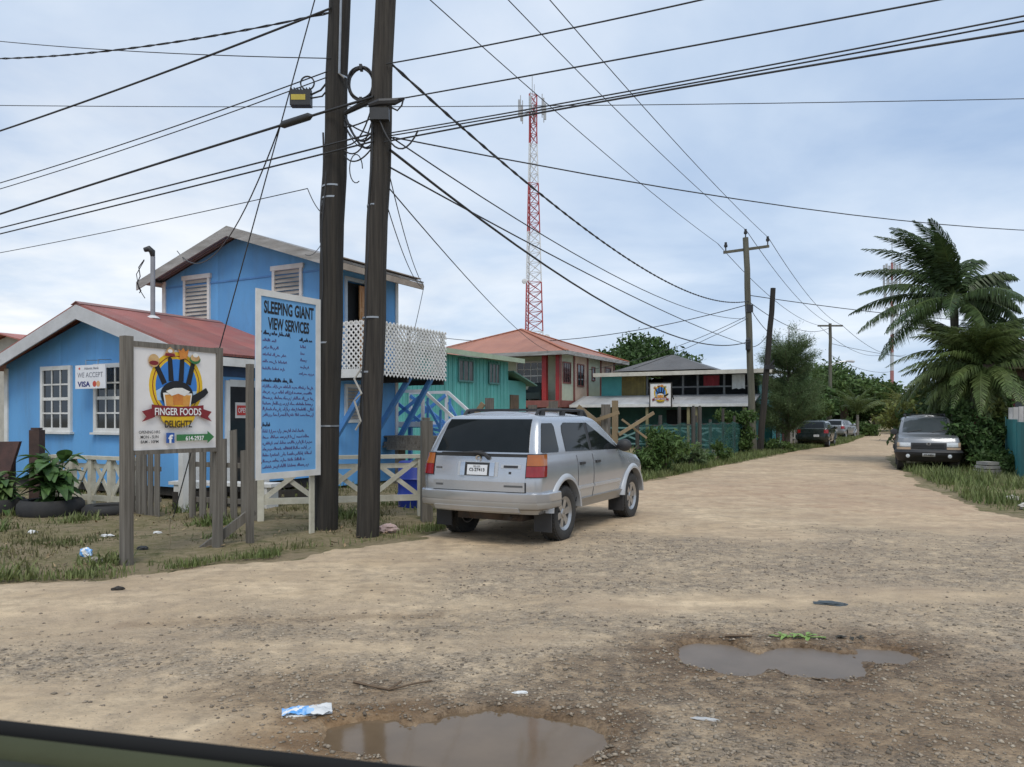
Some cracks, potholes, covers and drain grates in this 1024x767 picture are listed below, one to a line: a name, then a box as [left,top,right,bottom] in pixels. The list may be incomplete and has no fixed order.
pothole [666,636,929,681]
pothole [316,702,616,767]
